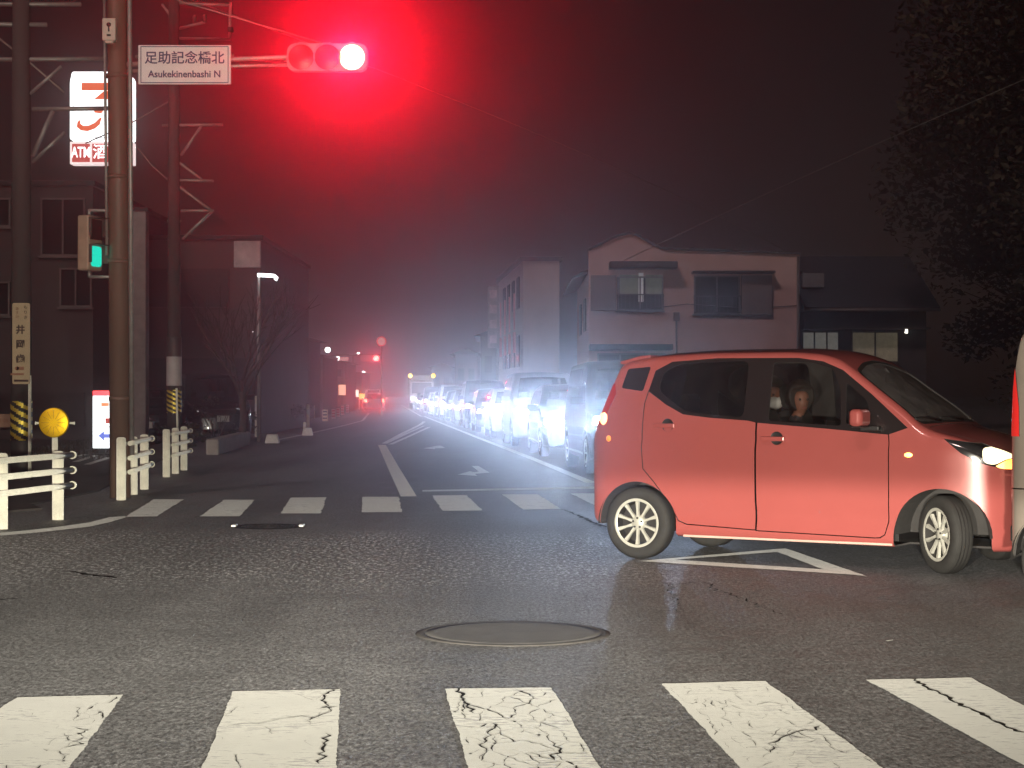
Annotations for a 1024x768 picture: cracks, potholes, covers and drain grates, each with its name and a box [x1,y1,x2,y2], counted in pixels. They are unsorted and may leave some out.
crack [6,696,117,768]
crack [671,689,870,768]
crack [454,687,587,768]
crack [910,678,1021,732]
manhole cover [415,621,610,647]
crack [59,570,116,578]
crack [222,689,337,768]
crack [656,582,783,615]
